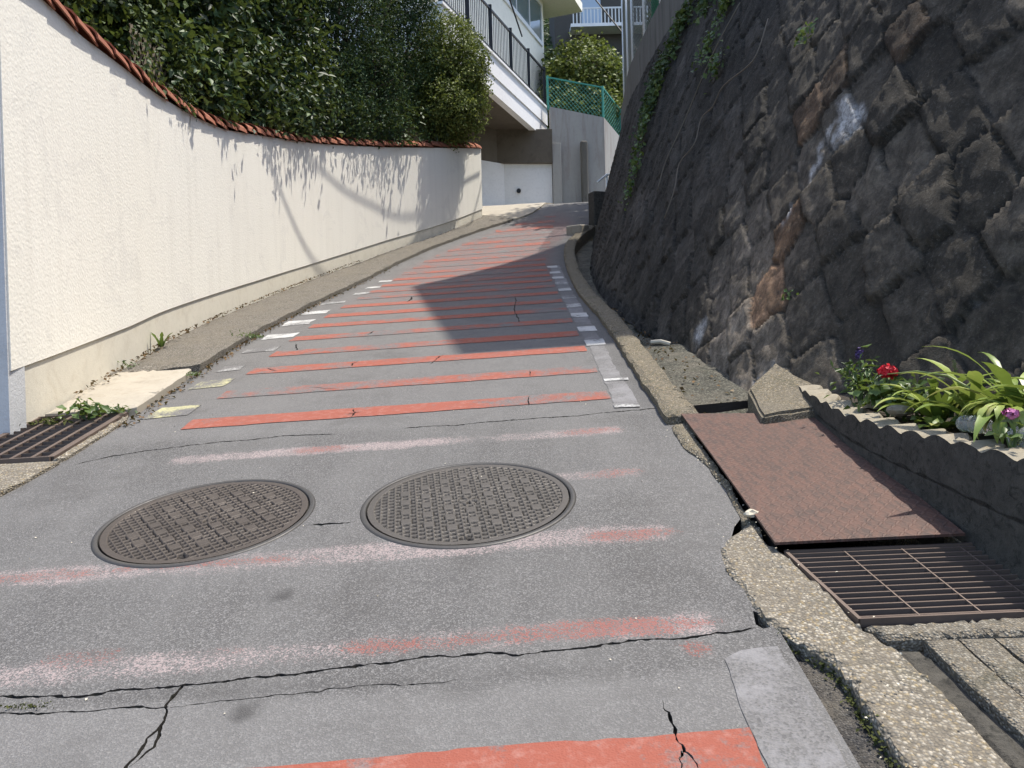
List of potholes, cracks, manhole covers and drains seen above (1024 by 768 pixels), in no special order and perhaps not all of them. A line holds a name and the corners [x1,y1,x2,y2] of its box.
drain grate [784,542,1024,627]
crack [79,434,330,464]
manhole cover [360,462,576,549]
drain grate [0,411,129,464]
crack [0,627,757,768]
manhole cover [91,479,315,568]
